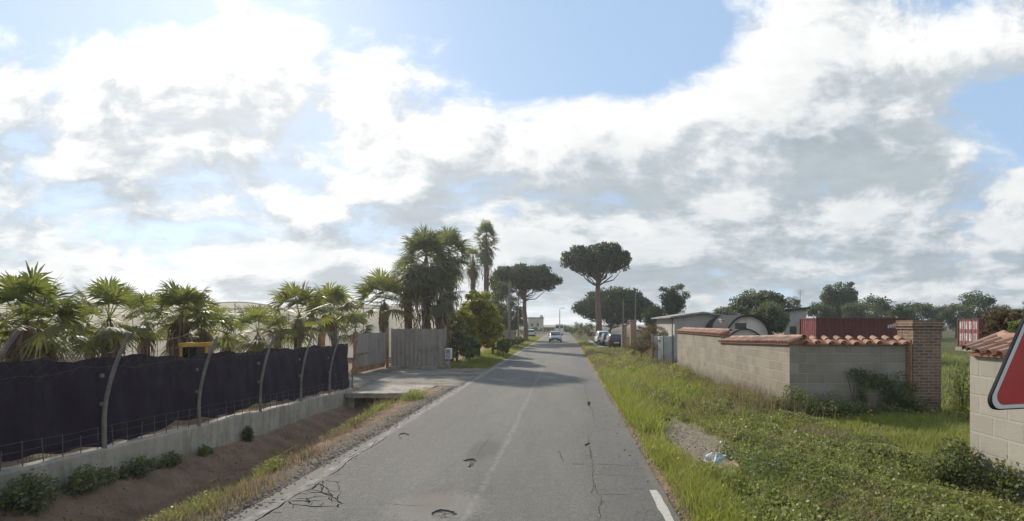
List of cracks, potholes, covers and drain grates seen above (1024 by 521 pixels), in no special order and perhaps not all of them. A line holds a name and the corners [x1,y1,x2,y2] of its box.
crack [585,386,629,520]
pothole [432,509,457,519]
crack [255,436,387,521]
